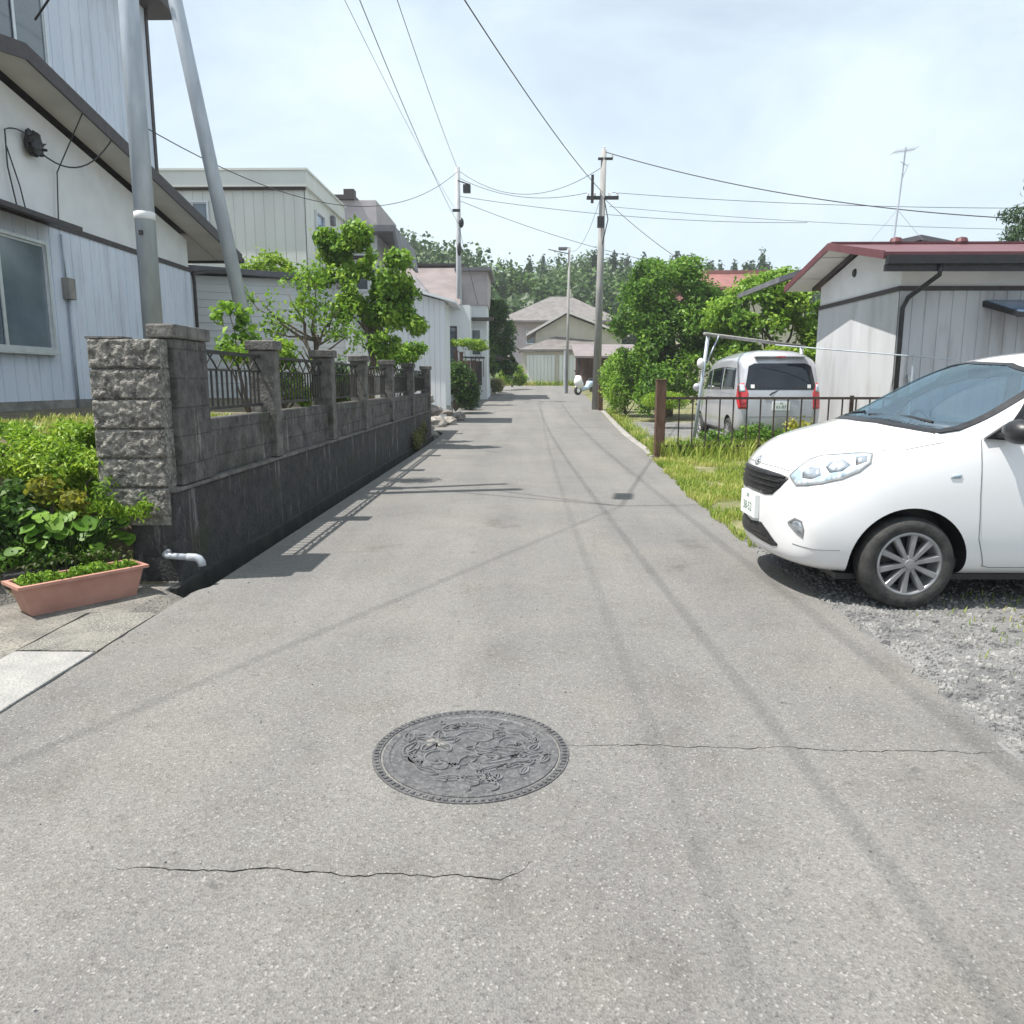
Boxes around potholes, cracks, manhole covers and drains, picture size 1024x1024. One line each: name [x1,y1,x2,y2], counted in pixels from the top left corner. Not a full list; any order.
crack [137,867,520,880]
manhole cover [372,710,569,805]
crack [597,744,979,754]
